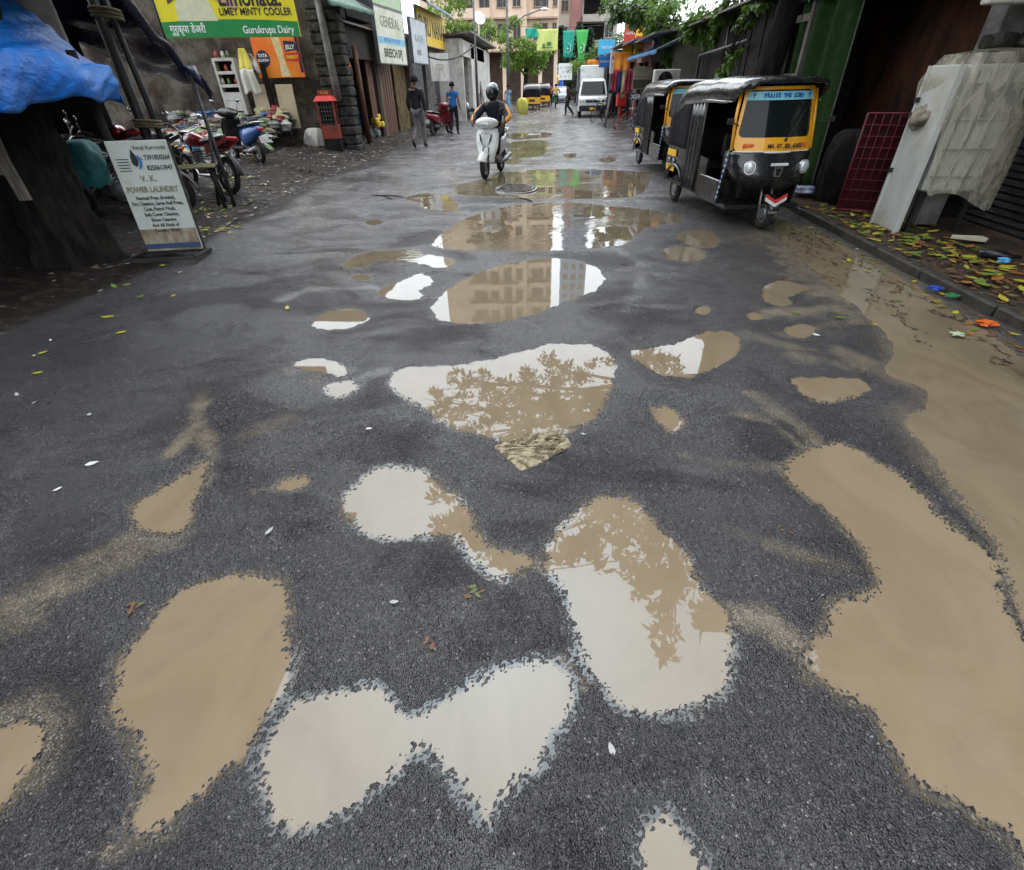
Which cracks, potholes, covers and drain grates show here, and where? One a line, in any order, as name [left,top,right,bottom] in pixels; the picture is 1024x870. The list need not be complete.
pothole [305,305,376,332]
pothole [426,255,613,326]
pothole [534,485,751,734]
pothole [774,436,1024,870]
pothole [0,703,71,822]
pothole [115,453,223,543]
pothole [779,372,882,408]
pothole [236,648,593,854]
pothole [623,327,750,381]
pothole [330,456,540,589]
pothole [426,200,692,252]
pothole [448,167,661,199]
